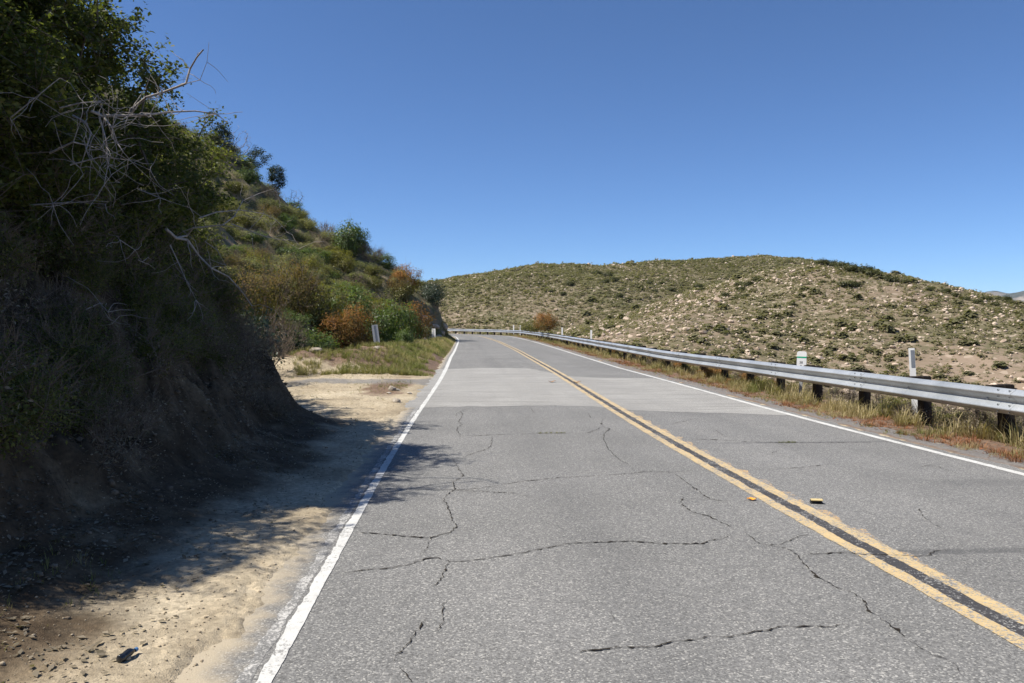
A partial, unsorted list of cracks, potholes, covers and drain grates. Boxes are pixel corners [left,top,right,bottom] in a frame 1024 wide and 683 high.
crack [570,624,840,653]
crack [363,411,730,548]
crack [393,602,445,682]
crack [330,497,729,585]
crack [749,534,964,678]
